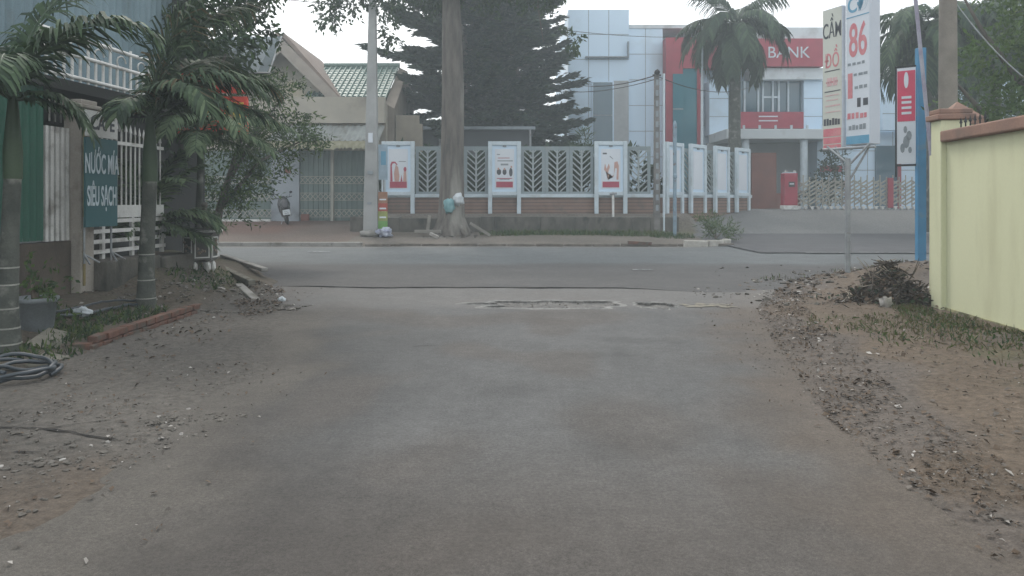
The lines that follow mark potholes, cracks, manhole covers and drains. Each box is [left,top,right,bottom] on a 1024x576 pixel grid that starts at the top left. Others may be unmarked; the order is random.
pothole [457,300,627,309]
pothole [633,302,680,310]
